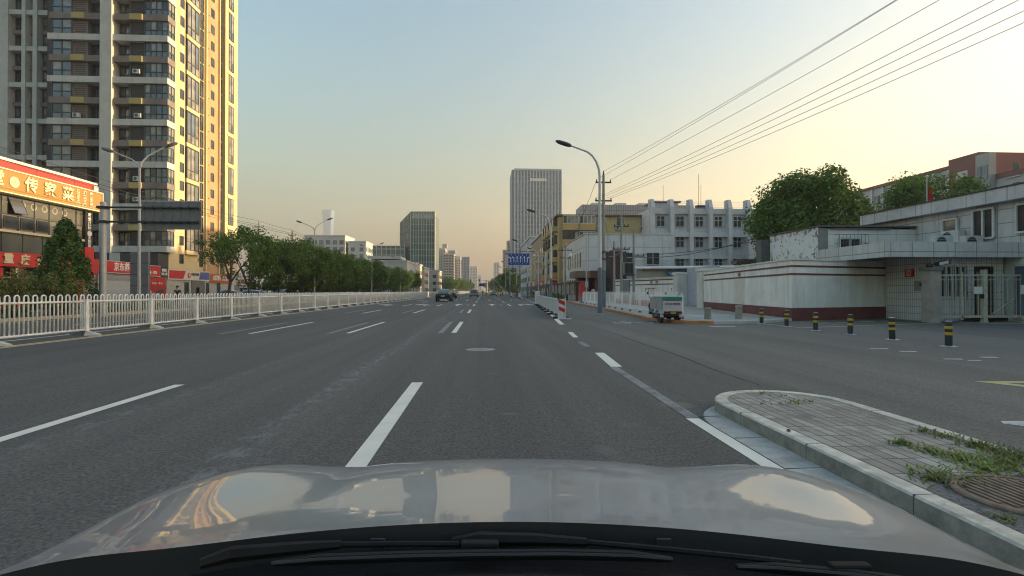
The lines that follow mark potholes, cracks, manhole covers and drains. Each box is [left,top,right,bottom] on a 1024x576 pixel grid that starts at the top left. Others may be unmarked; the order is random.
manhole cover [948,474,1024,516]
